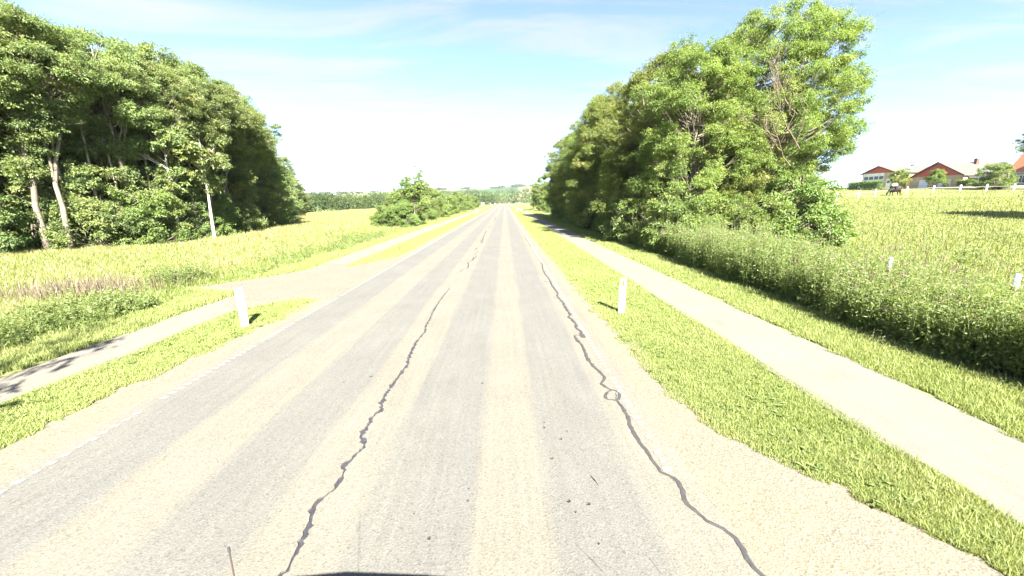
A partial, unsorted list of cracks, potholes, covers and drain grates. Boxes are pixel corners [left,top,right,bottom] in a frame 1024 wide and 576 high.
crack [278,289,449,576]
